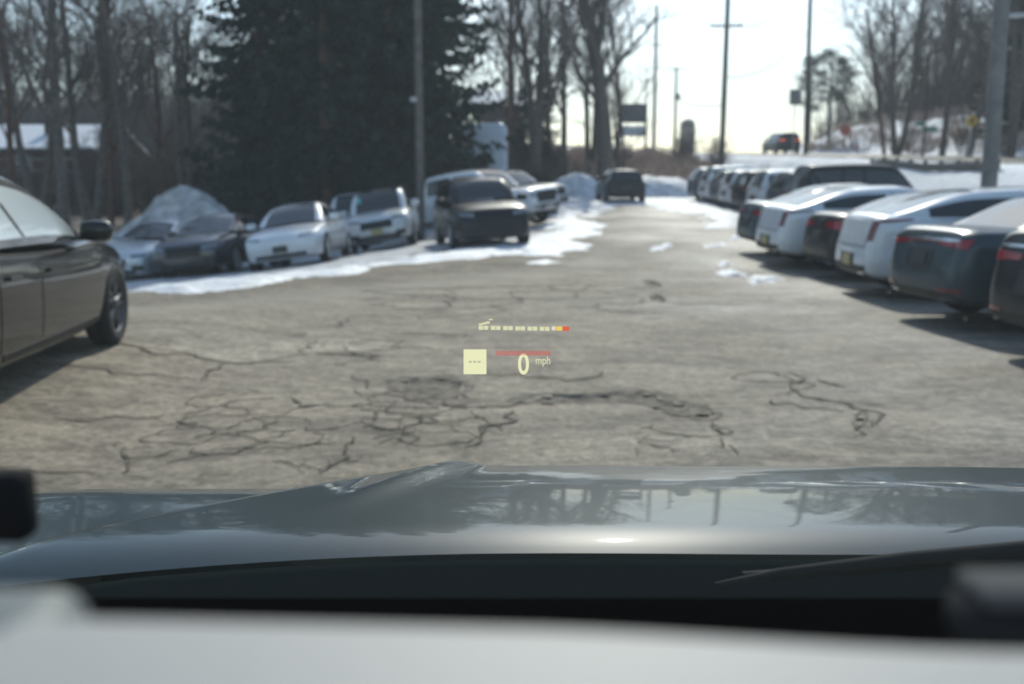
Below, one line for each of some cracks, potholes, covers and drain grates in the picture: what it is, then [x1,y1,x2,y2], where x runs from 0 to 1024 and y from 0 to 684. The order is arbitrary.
pothole [507,389,712,415]
pothole [385,374,475,406]
crack [31,284,738,478]
crack [730,371,885,436]
